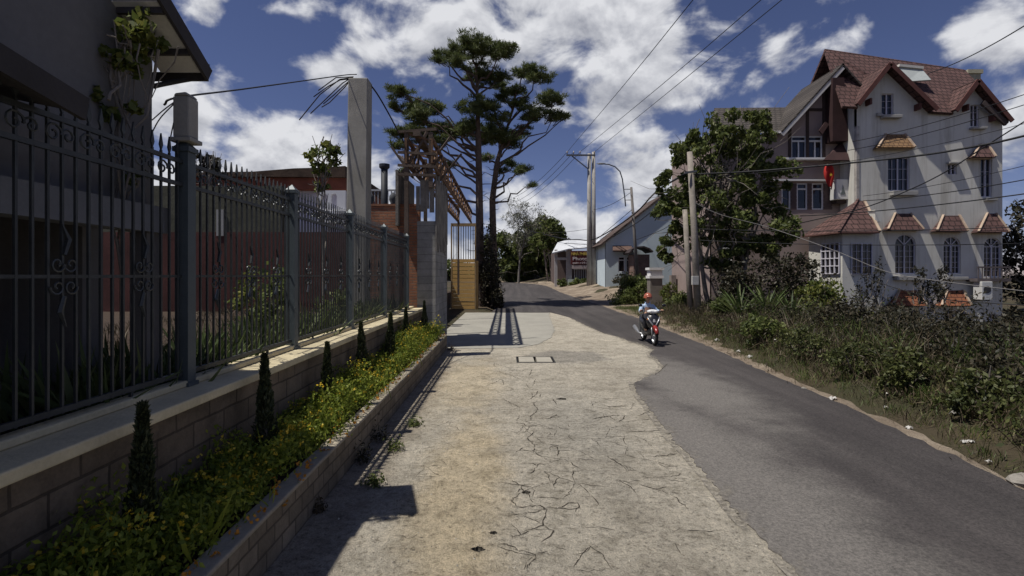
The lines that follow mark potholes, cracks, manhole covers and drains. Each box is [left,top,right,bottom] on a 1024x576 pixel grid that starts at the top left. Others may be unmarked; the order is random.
crack [483,364,690,572]
